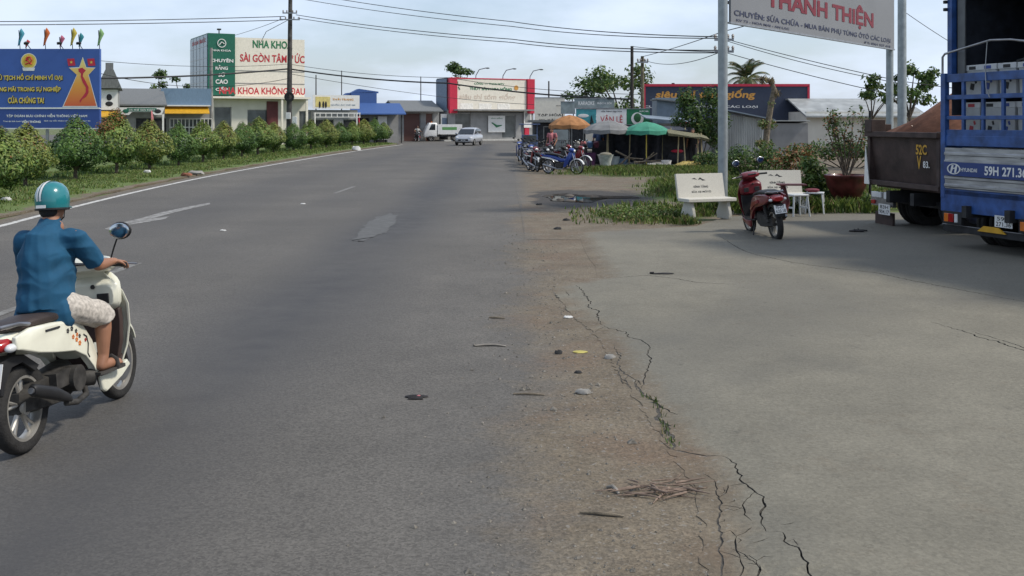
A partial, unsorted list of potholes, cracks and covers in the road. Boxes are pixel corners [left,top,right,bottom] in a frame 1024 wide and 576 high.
pothole [542,193,639,203]
crack [566,286,704,456]
crack [693,459,812,576]
